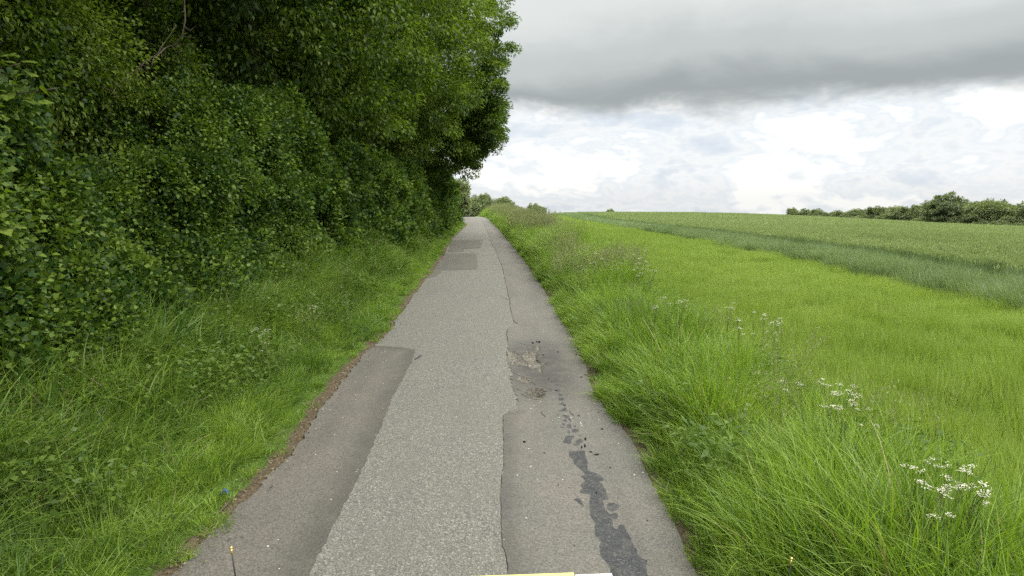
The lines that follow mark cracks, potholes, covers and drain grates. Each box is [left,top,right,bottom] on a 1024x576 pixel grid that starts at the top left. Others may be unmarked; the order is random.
pothole [525,388,547,400]
pothole [508,351,546,373]
